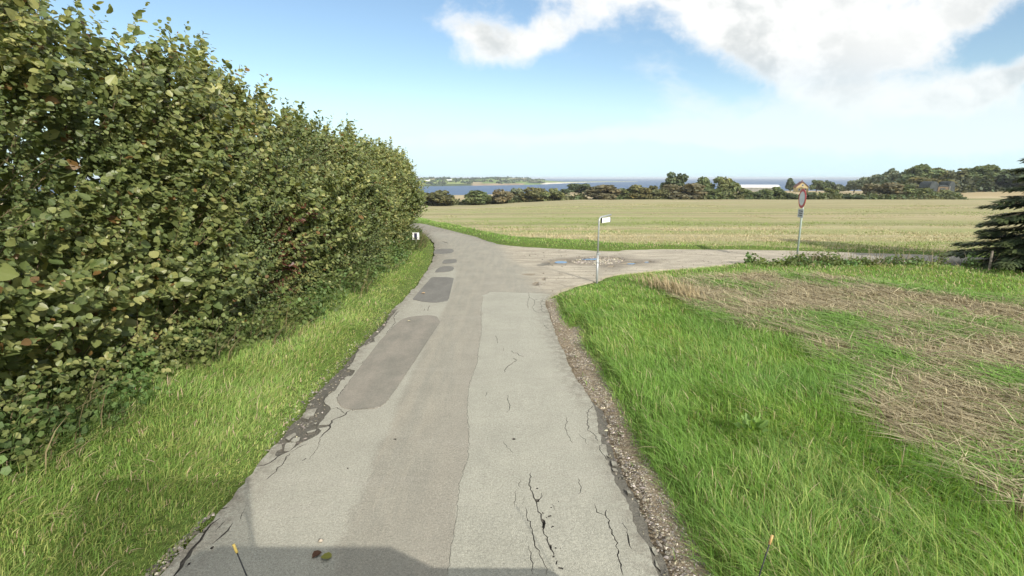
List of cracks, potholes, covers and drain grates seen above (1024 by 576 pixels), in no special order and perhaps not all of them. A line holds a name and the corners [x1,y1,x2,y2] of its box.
crack [514,473,563,574]
crack [174,507,245,576]
crack [578,480,632,575]
crack [565,406,607,460]
